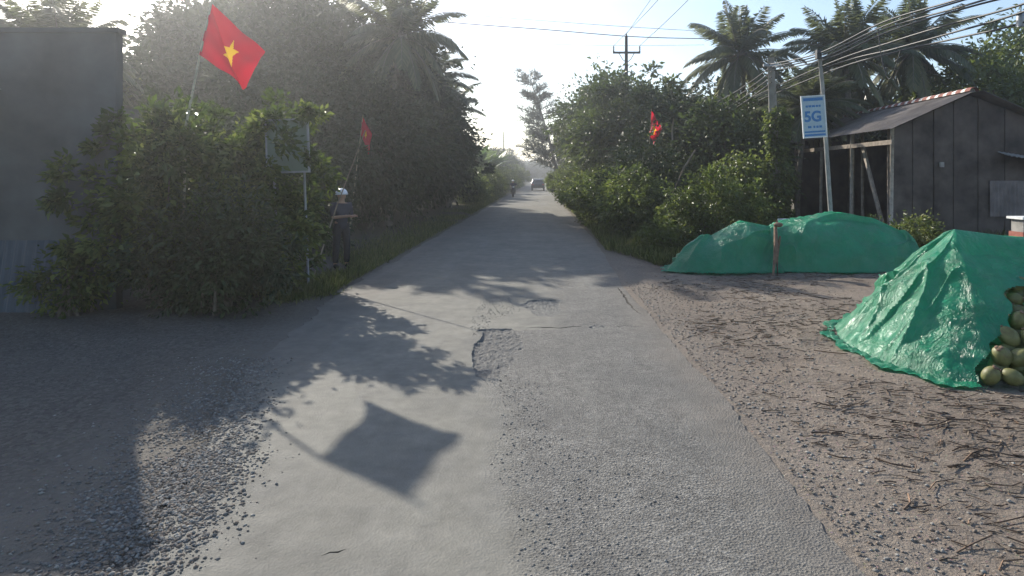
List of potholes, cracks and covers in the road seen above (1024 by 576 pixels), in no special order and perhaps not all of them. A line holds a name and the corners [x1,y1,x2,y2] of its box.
pothole [520,299,563,317]
pothole [471,328,524,379]
